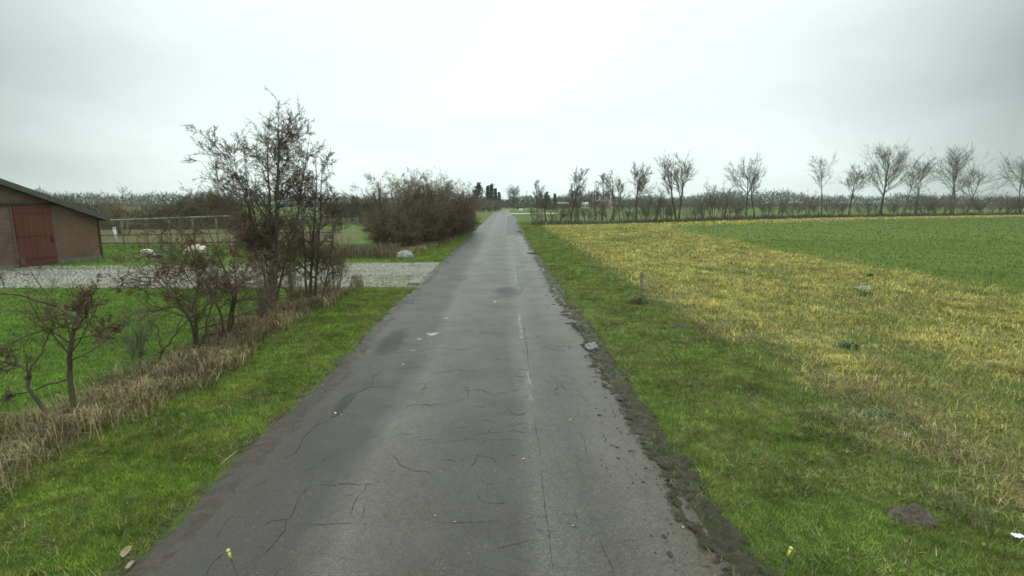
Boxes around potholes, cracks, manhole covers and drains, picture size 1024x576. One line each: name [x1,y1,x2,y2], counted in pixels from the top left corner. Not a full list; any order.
crack [259,458,381,556]
crack [278,372,390,461]
crack [376,255,577,572]
